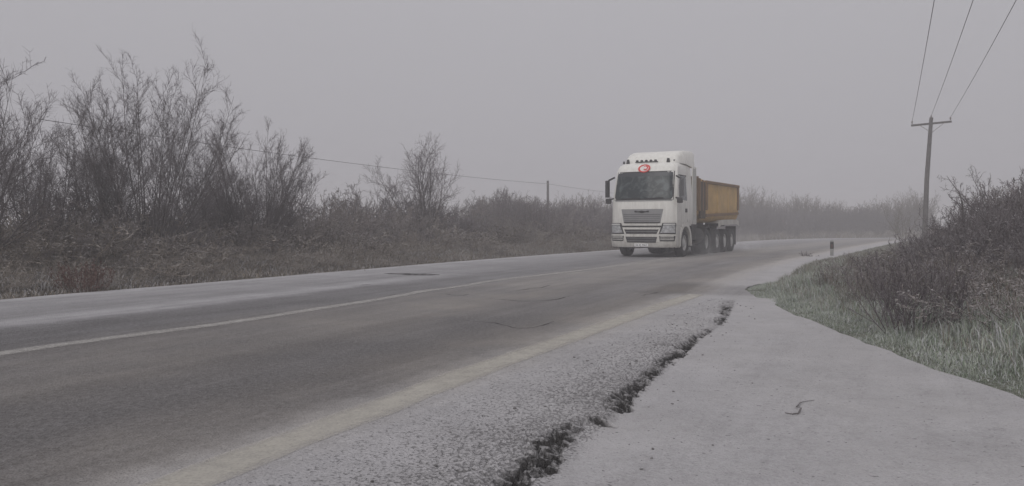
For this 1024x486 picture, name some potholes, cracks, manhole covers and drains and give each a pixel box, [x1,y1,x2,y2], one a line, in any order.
crack [293,284,777,486]
